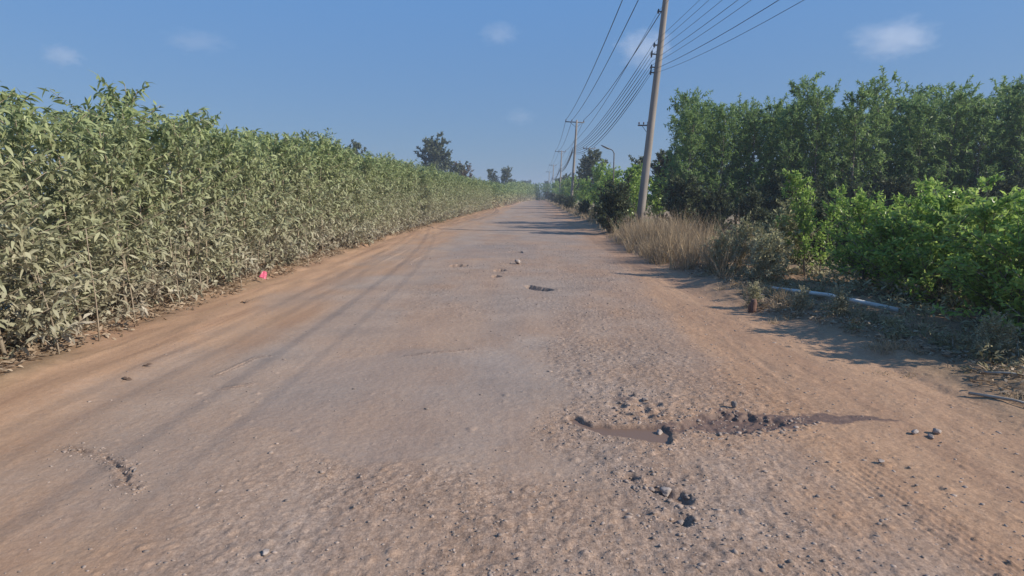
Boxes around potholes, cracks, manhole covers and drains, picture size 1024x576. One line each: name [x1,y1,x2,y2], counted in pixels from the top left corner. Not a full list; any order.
pothole [566,414,676,445]
pothole [663,408,803,437]
